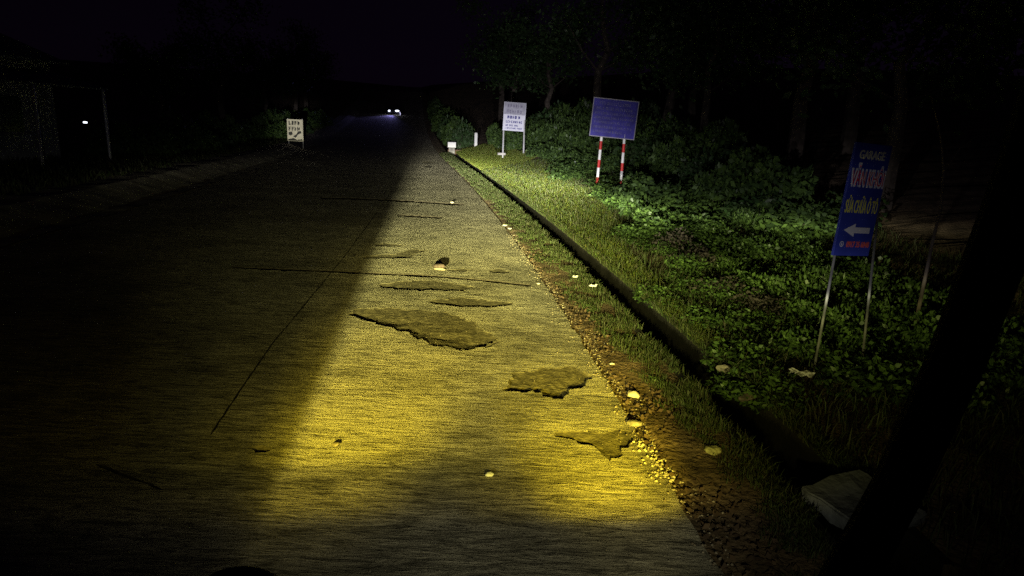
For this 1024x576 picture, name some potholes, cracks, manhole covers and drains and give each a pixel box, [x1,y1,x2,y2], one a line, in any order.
pothole [377,280,475,291]
pothole [554,429,639,461]
crack [210,191,532,435]
pothole [502,366,594,399]
pothole [348,307,497,351]
crack [96,464,162,490]
pothole [429,297,513,308]
